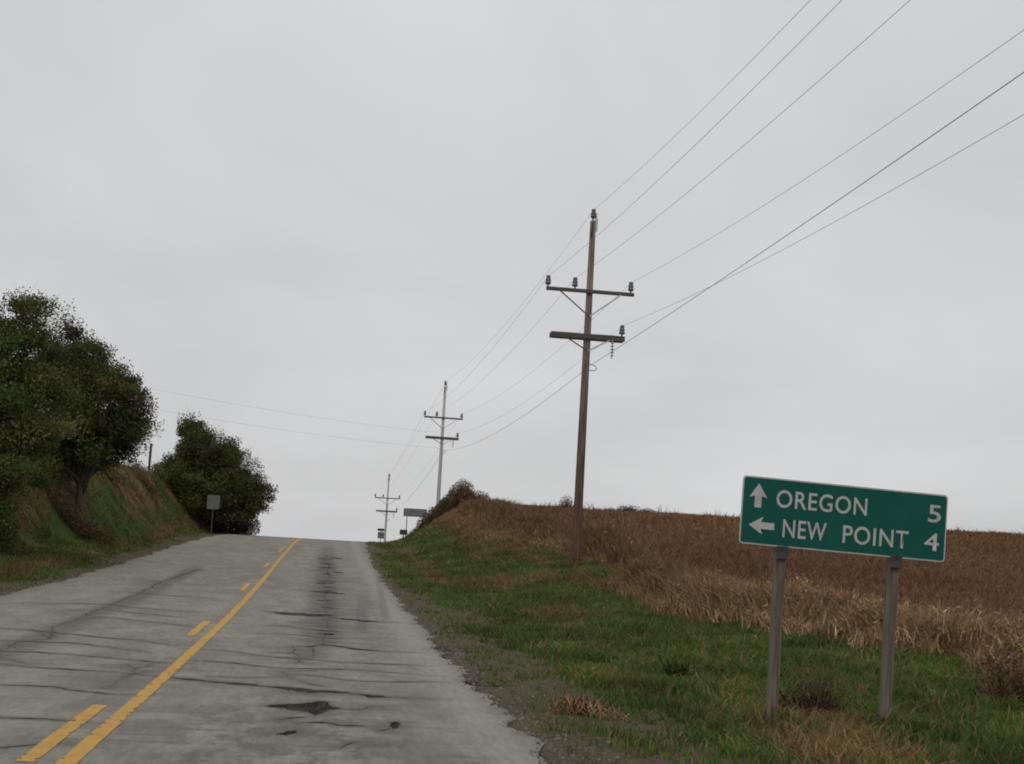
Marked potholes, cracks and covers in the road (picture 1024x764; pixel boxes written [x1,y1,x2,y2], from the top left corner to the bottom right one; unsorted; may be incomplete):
crack [0,556,427,748]
pothole [267,701,340,716]
